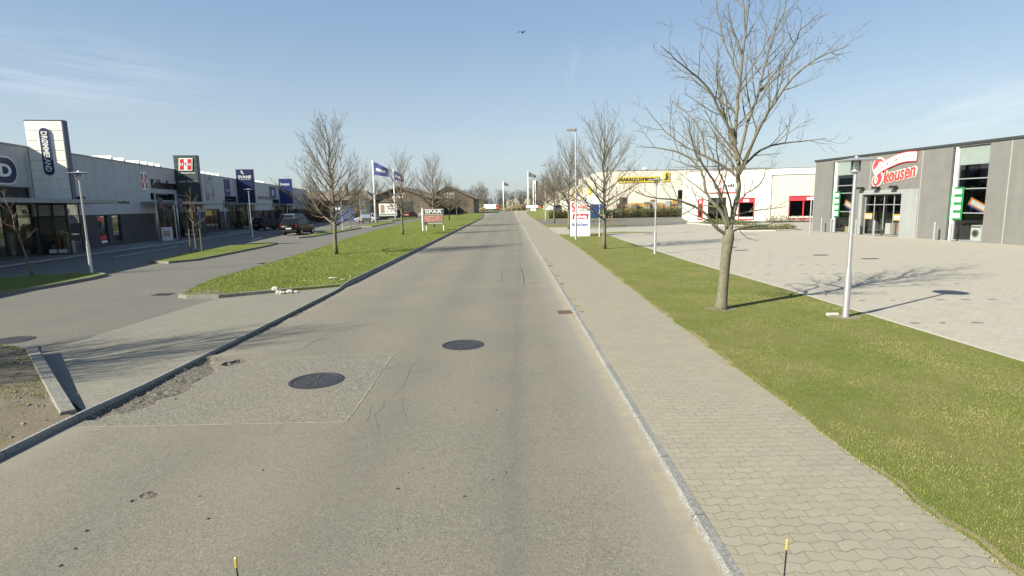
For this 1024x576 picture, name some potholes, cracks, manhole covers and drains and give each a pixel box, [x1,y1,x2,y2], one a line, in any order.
manhole cover [287,372,345,390]
pothole [139,491,160,499]
pothole [79,356,248,422]
manhole cover [441,340,485,351]
crack [363,355,416,435]
